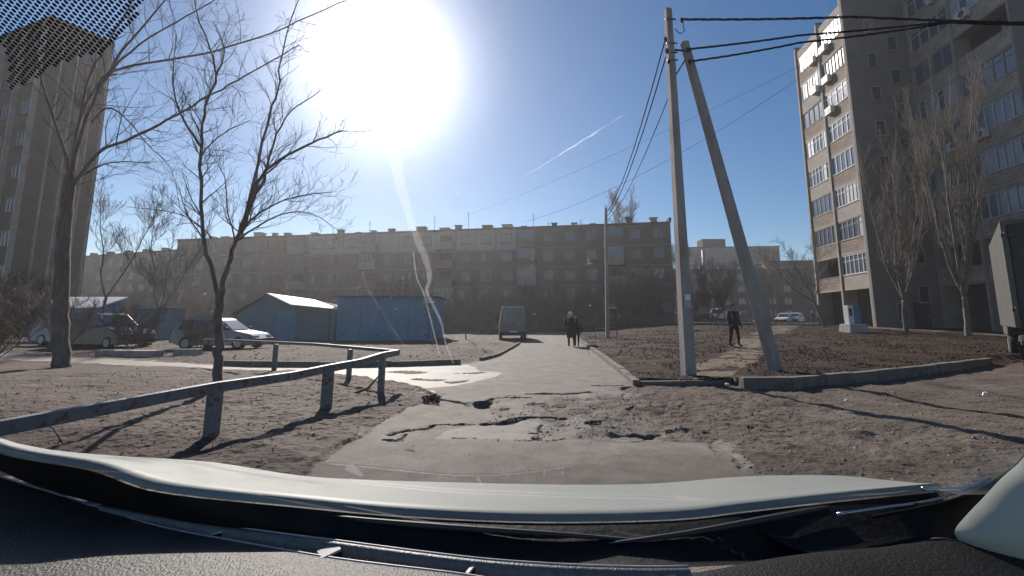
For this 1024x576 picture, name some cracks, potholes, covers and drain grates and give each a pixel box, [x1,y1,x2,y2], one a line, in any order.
pothole [472,400,493,410]
crack [381,385,647,453]
pothole [421,394,441,406]
